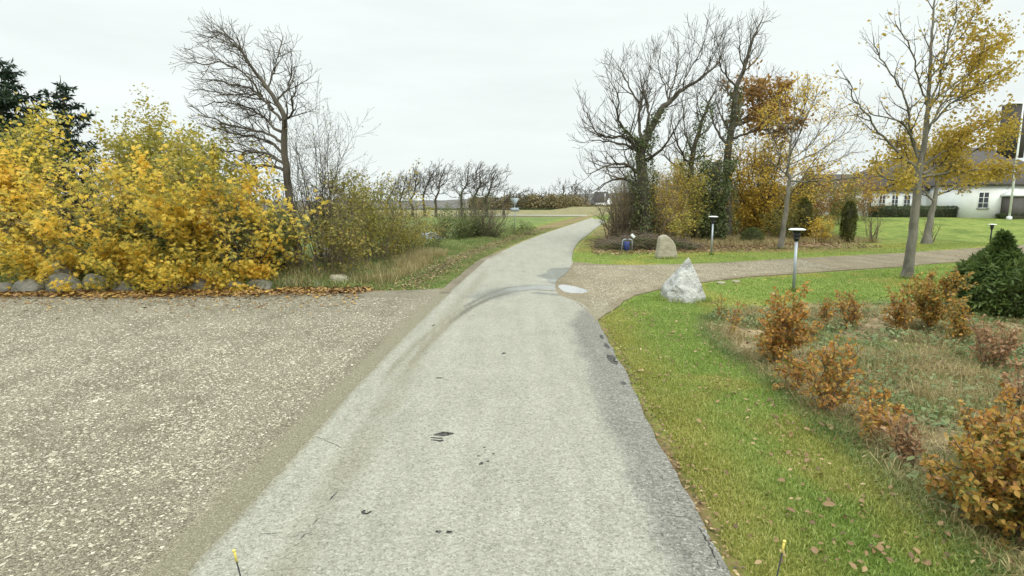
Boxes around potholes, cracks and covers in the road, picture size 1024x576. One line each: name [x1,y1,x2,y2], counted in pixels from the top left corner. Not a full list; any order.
crack [674,516,720,567]
crack [263,492,338,545]
